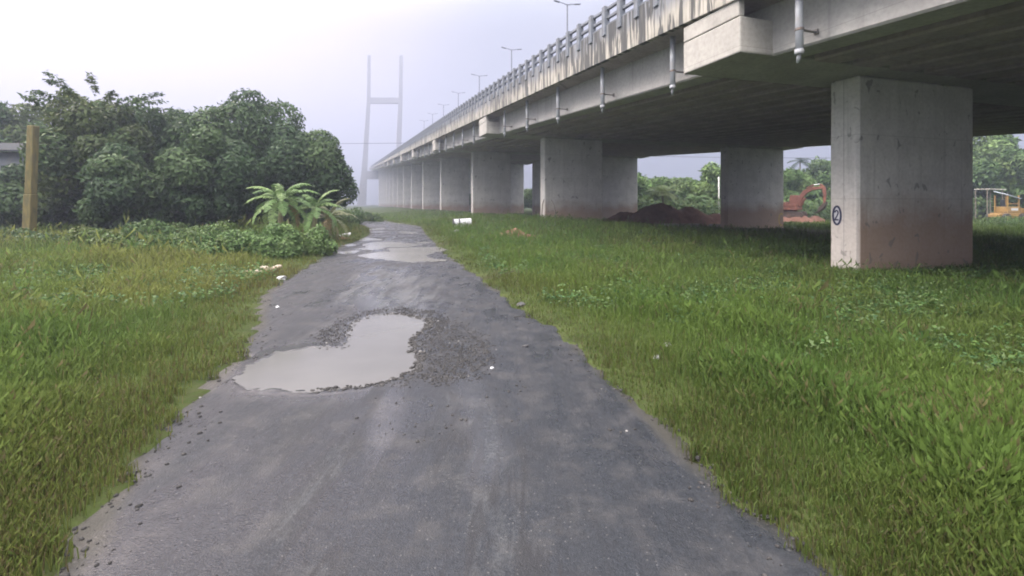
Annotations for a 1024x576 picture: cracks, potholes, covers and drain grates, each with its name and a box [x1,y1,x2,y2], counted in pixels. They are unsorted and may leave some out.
pothole [355,241,421,250]
pothole [227,312,439,397]
pothole [356,247,447,263]
